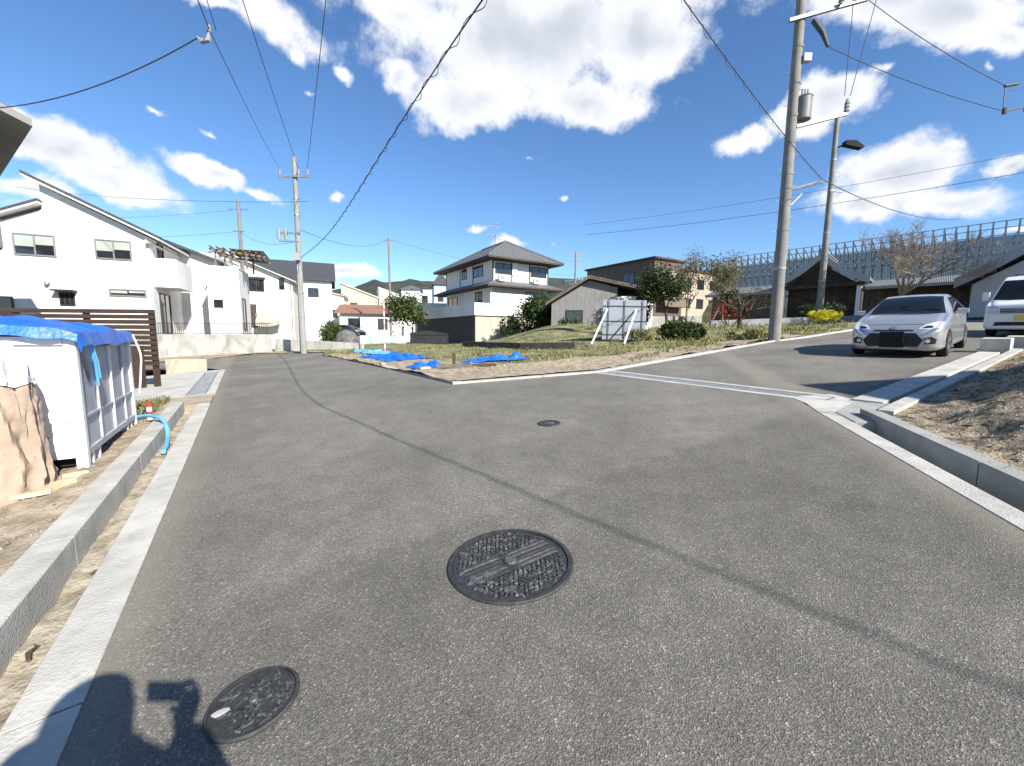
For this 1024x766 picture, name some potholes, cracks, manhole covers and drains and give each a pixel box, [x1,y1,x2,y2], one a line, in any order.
manhole cover [202,665,300,745]
drain grate [186,371,218,396]
manhole cover [447,529,574,606]
